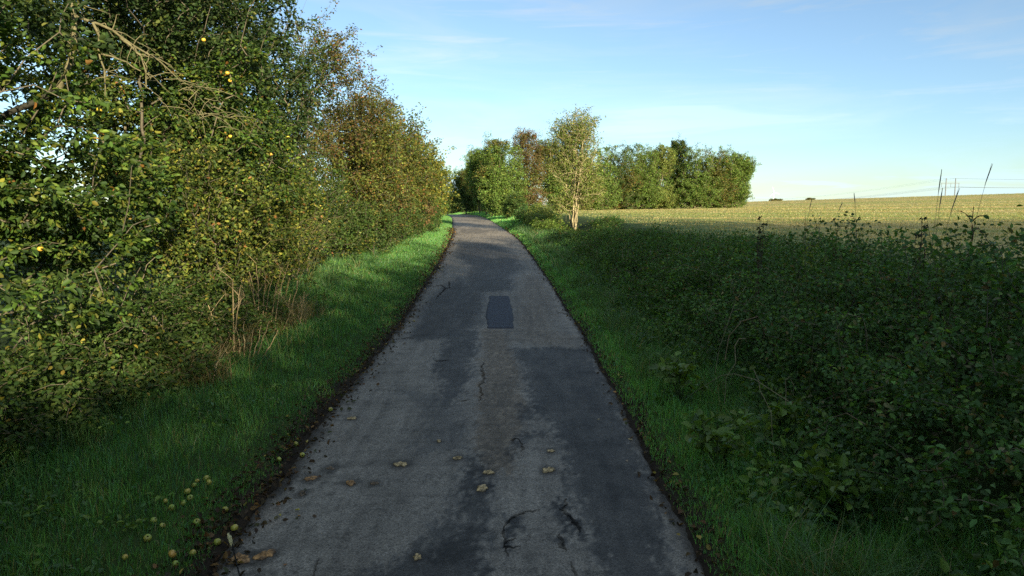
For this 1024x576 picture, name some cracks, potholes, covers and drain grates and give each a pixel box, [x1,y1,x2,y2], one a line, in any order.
crack [501,509,540,556]
crack [461,362,486,401]
crack [557,498,581,576]
